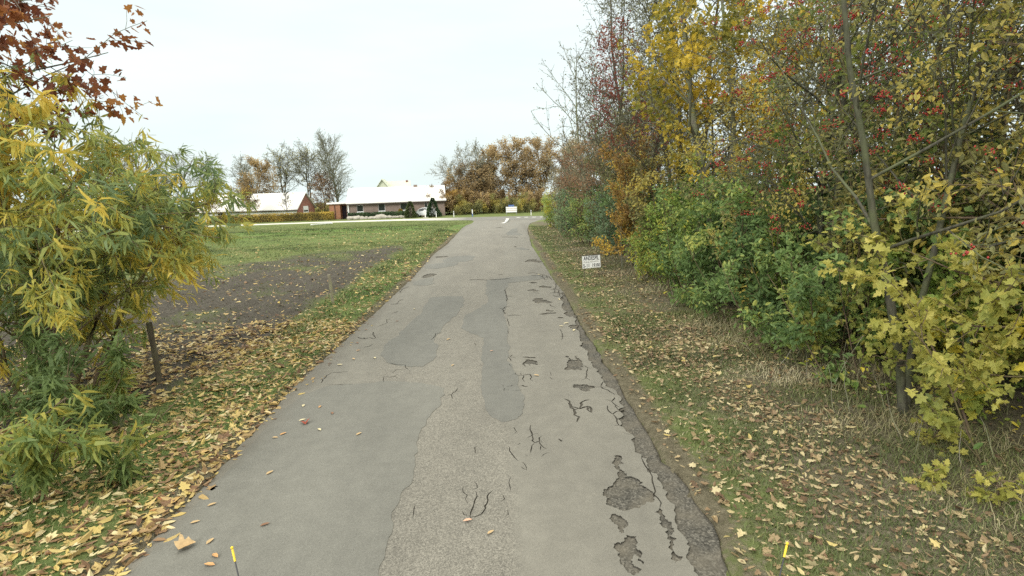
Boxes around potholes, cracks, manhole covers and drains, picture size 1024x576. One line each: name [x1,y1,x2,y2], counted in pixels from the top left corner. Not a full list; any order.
pothole [565,356,583,370]
crack [565,367,627,434]
pothole [614,535,644,575]
crack [641,458,662,506]
crack [462,426,550,520]
pothole [609,514,628,533]
pothole [603,455,655,511]
